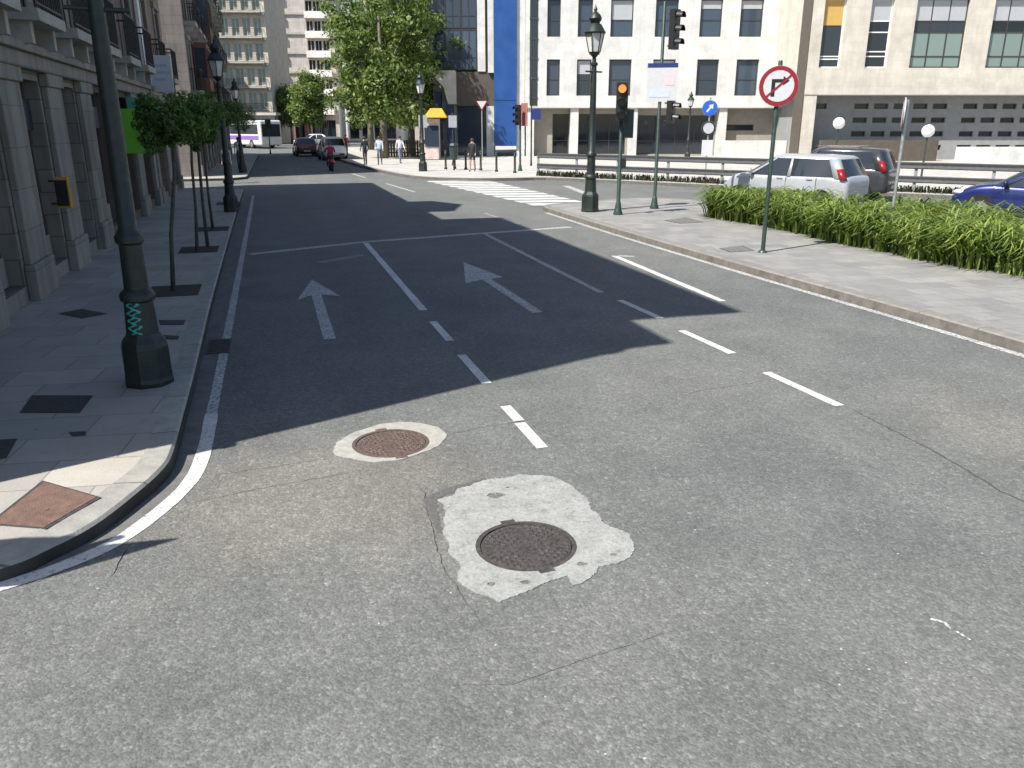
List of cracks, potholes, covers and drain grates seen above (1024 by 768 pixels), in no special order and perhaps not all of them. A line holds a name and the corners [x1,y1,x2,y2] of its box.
crack [467,628,680,685]
drain grate [205,338,231,355]
manhole cover [476,519,577,574]
manhole cover [352,428,429,459]
